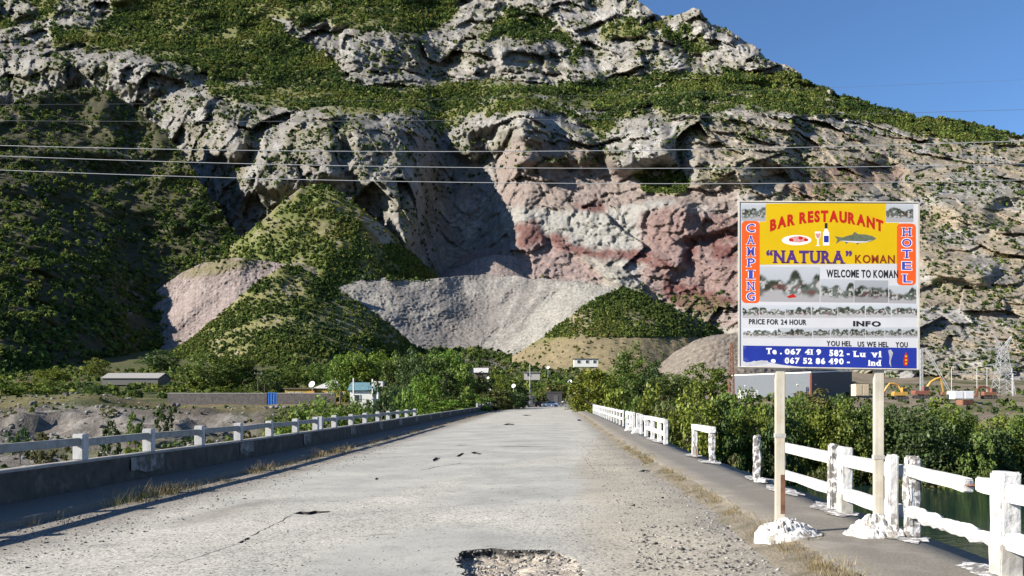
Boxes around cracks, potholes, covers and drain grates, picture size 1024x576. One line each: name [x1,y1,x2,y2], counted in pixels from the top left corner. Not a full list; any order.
pothole [455,548,586,576]
